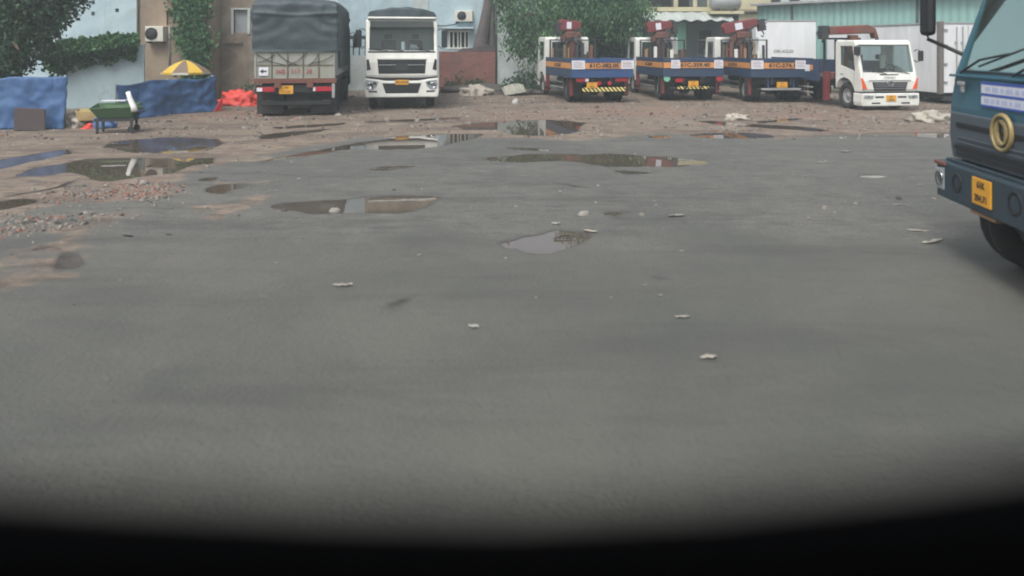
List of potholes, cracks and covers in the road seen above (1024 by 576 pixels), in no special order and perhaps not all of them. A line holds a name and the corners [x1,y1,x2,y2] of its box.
pothole [0,149,72,169]
pothole [501,230,591,254]
pothole [0,198,37,210]
pothole [485,153,710,167]
pothole [103,137,223,153]
pothole [263,134,483,162]
pothole [271,196,439,214]
pothole [53,252,83,270]
pothole [16,158,215,181]
pothole [452,120,587,136]
pothole [206,184,250,194]
